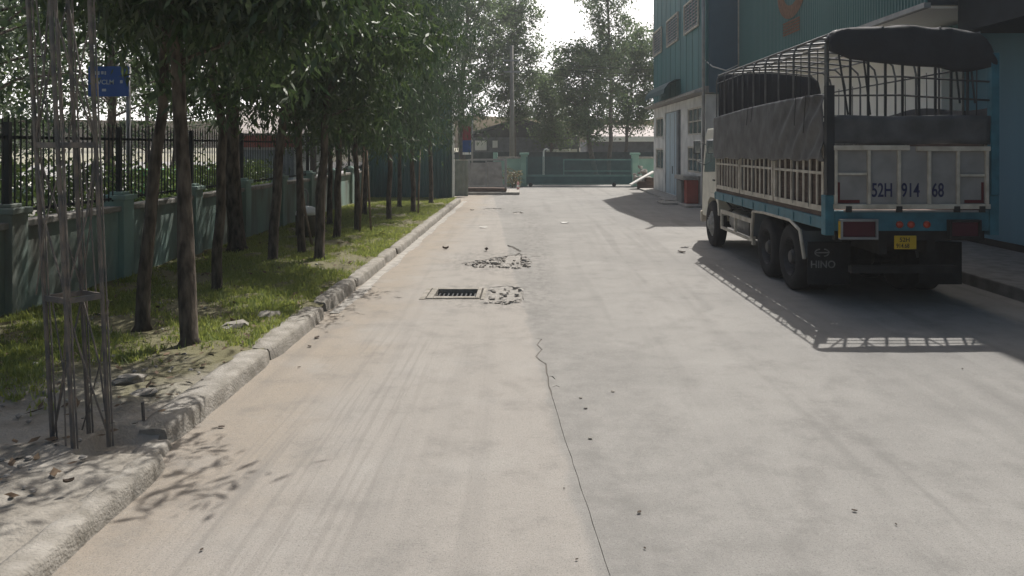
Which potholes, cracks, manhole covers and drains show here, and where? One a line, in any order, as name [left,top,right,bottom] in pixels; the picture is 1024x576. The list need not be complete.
pothole [483,286,524,305]
crack [535,338,610,575]
pothole [461,253,532,269]
